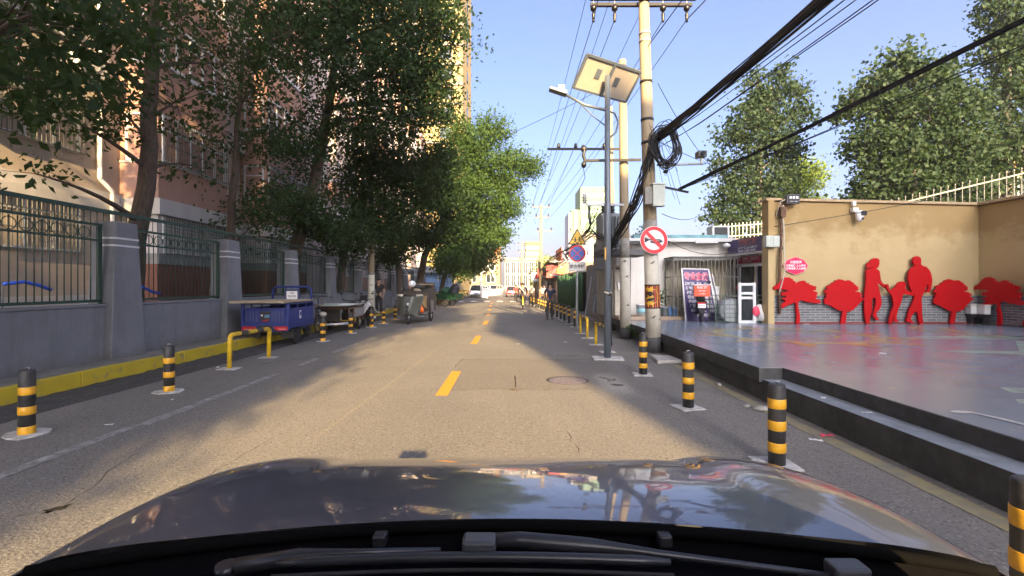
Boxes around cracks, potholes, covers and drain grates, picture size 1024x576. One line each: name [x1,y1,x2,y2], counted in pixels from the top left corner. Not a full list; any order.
manhole cover [546,376,589,385]
crack [0,455,133,519]
